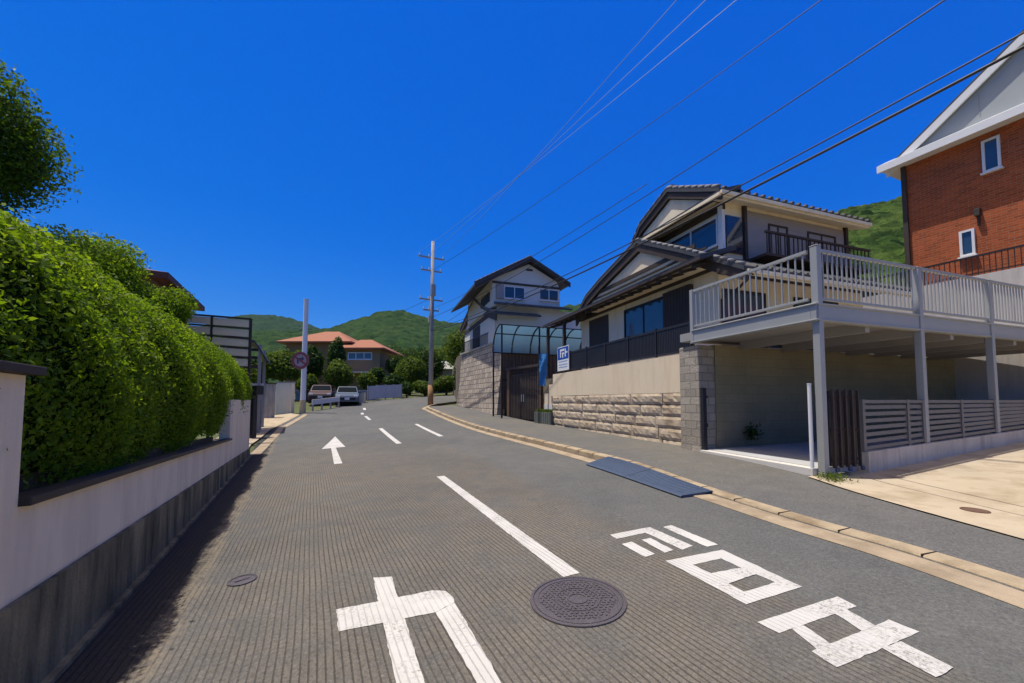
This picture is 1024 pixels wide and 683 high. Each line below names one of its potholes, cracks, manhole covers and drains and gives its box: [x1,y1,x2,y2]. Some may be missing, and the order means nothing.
manhole cover [227,574,257,586]
manhole cover [530,576,627,628]
